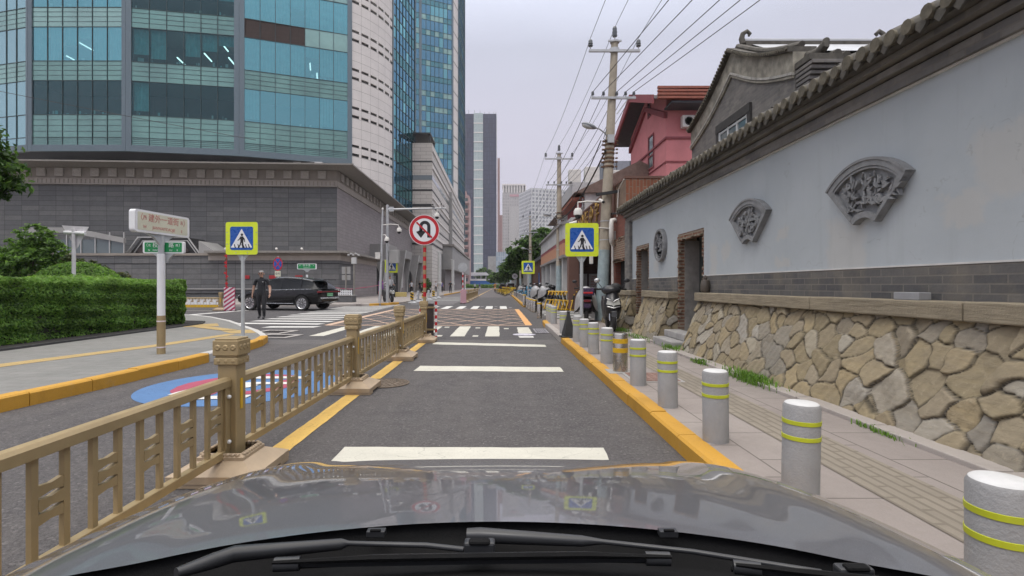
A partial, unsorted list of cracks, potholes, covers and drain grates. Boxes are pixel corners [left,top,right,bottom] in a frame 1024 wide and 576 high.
manhole cover [377,378,410,388]
